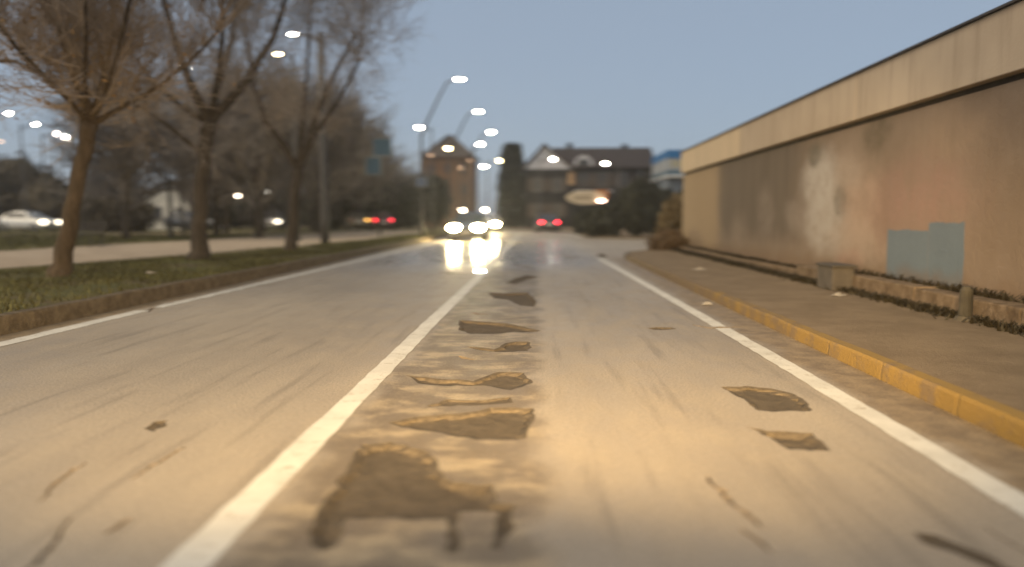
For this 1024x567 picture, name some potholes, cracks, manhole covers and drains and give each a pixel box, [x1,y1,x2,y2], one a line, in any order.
pothole [469,342,532,352]
pothole [145,420,167,432]
pothole [722,386,812,412]
pothole [407,372,533,390]
crack [707,475,773,554]
pothole [390,407,535,440]
pothole [749,427,830,451]
pothole [506,275,537,284]
pothole [308,442,517,553]
crack [30,461,131,567]
pothole [489,293,537,306]
pothole [426,397,513,407]
